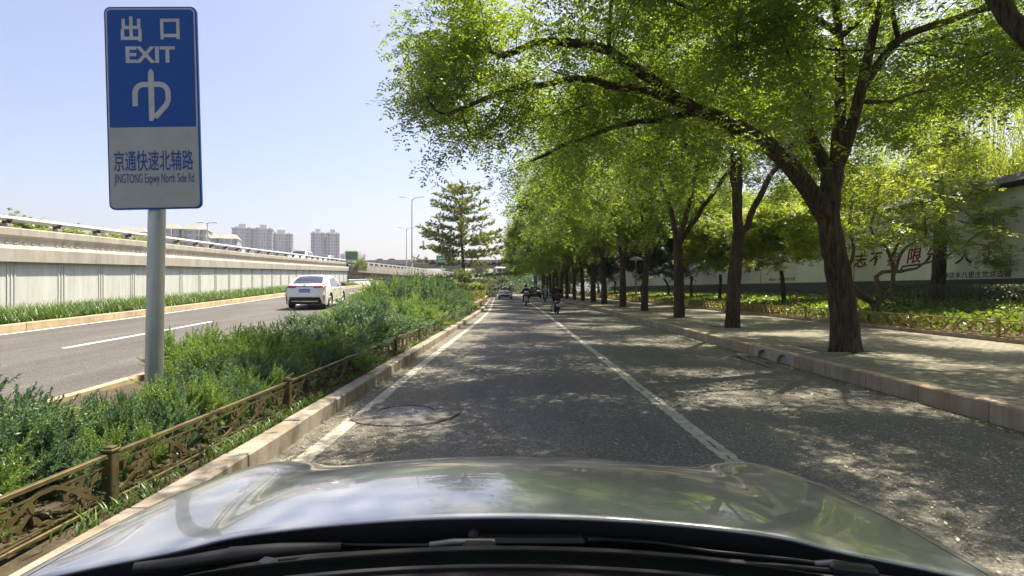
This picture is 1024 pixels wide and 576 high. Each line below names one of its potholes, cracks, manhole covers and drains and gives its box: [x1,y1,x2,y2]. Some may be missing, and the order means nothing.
manhole cover [375,405,436,419]
drain grate [729,356,792,368]
